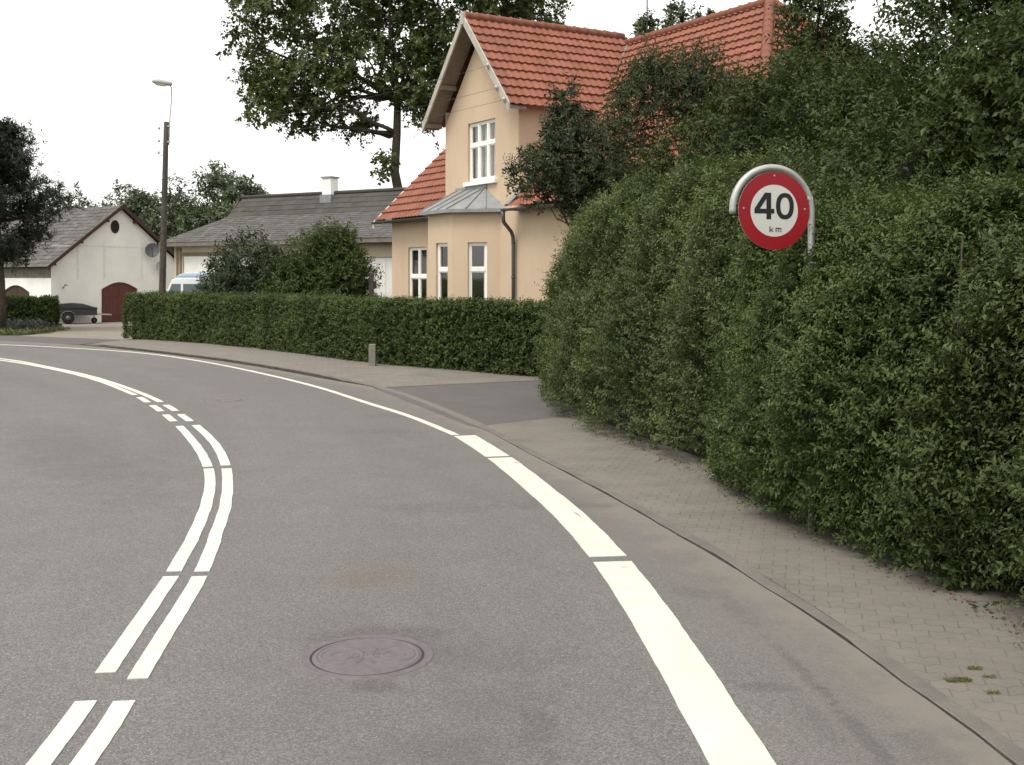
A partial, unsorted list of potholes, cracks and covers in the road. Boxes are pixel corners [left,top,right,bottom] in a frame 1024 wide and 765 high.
manhole cover [300,635,434,680]
